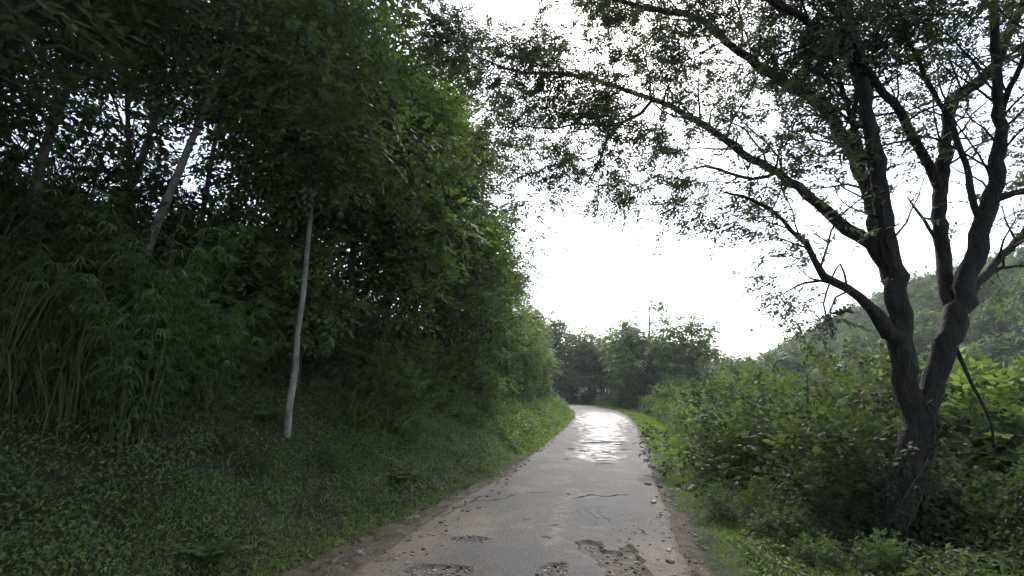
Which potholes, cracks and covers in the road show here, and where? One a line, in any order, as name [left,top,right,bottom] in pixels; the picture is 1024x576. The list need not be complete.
pothole [449,534,494,543]
crack [439,494,516,519]
crack [572,494,630,525]
pothole [534,562,569,576]
pothole [573,539,654,576]
pothole [403,563,474,576]
